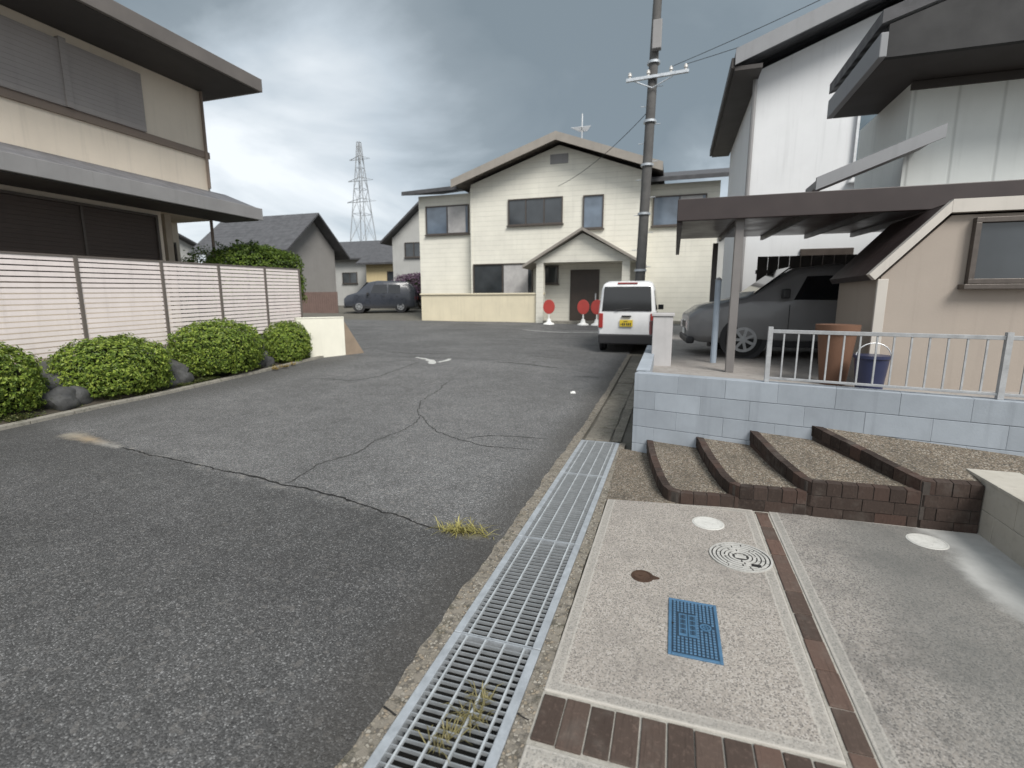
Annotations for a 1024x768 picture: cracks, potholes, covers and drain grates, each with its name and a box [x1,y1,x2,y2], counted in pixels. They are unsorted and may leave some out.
manhole cover [709,542,773,573]
drain grate [363,632,540,768]
drain grate [454,536,581,652]
utility cover [905,533,950,550]
crack [417,382,545,449]
utility cover [692,516,724,530]
crack [123,416,437,529]
drain grate [518,472,607,545]
utility cover [631,570,660,582]
drain grate [560,440,620,477]
